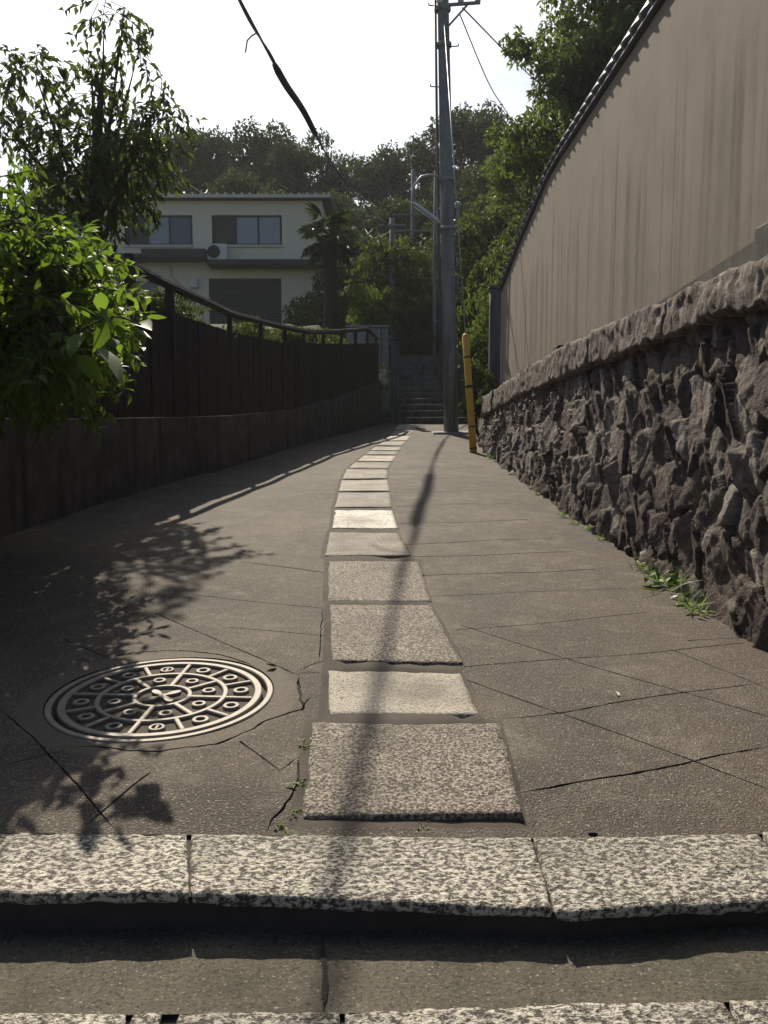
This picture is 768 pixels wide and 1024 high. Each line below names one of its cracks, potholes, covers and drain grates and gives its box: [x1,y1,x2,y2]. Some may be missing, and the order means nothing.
crack [0,611,327,831]
manhole cover [44,658,273,743]
crack [521,747,765,793]
